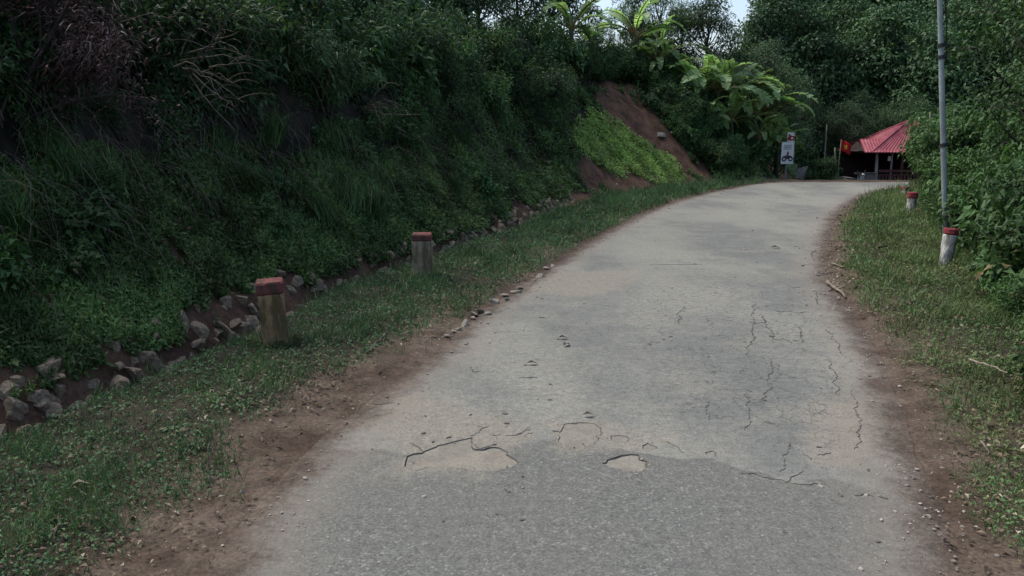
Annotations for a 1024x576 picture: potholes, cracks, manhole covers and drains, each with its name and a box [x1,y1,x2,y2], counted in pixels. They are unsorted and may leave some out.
crack [825,329,862,450]
pothole [402,437,521,473]
pothole [550,422,604,452]
crack [741,444,830,485]
pothole [600,453,650,473]
crack [744,360,774,430]
crack [745,292,819,355]
